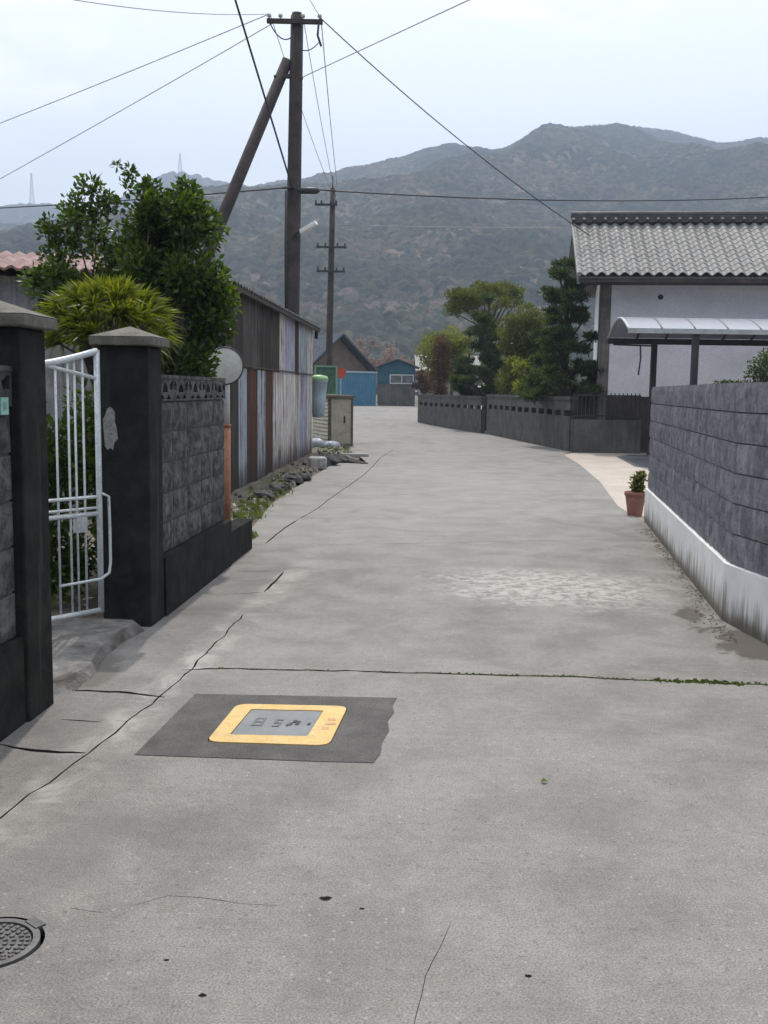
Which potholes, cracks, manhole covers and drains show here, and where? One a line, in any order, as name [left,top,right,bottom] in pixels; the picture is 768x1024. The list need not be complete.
crack [73,896,277,913]
crack [266,442,467,543]
manhole cover [209,704,346,746]
crack [240,572,284,594]
crack [414,923,451,1023]
crack [0,616,768,819]
manhole cover [0,917,46,968]
